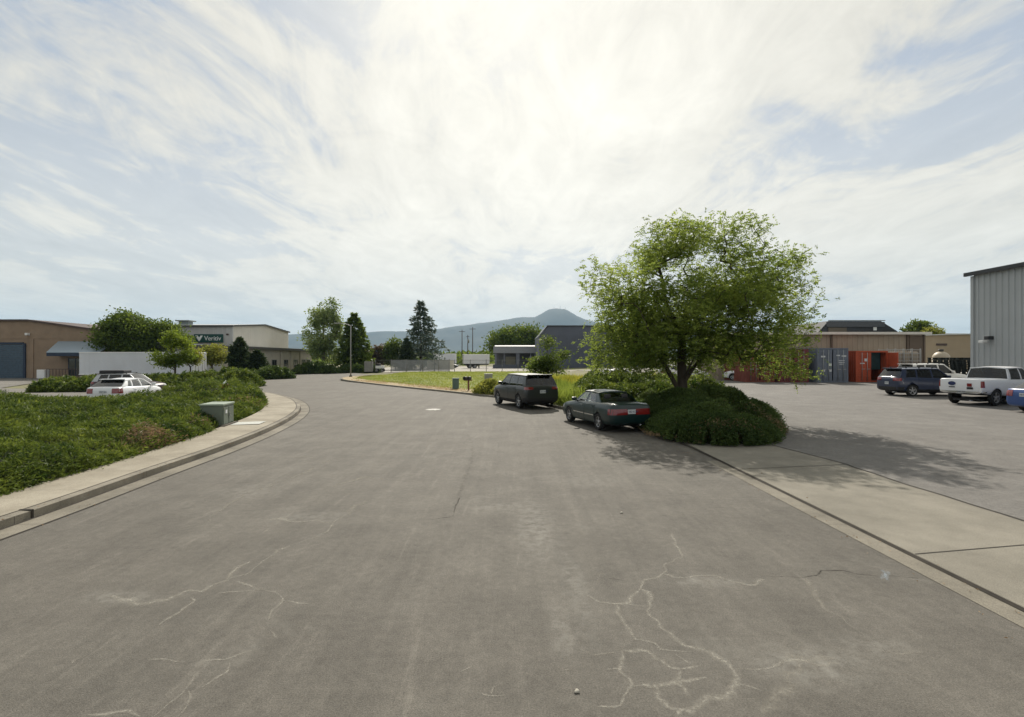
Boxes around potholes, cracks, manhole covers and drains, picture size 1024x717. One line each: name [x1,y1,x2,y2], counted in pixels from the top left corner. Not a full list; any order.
crack [565,535,838,715]
crack [93,659,230,717]
crack [110,456,359,637]
